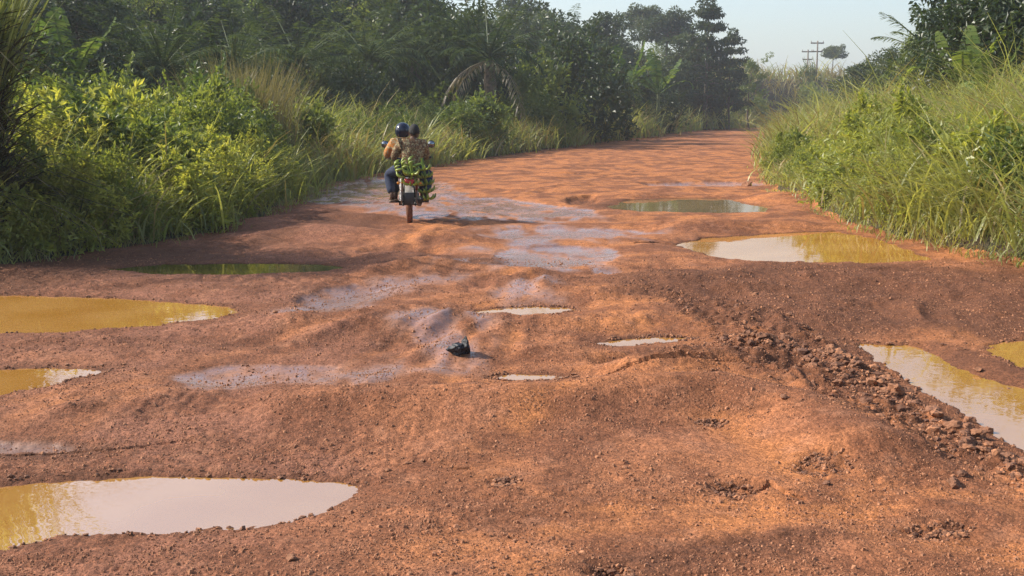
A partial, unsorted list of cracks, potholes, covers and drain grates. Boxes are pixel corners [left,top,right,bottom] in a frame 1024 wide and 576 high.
pothole [0,466,366,550]
pothole [0,364,122,395]
pothole [699,474,777,503]
pothole [852,339,1024,453]
pothole [483,370,576,380]
pothole [675,230,937,263]
pothole [466,304,584,315]
pothole [784,440,872,480]
pothole [591,197,775,213]
pothole [591,334,696,347]
pothole [0,292,247,333]
pothole [104,261,352,275]
